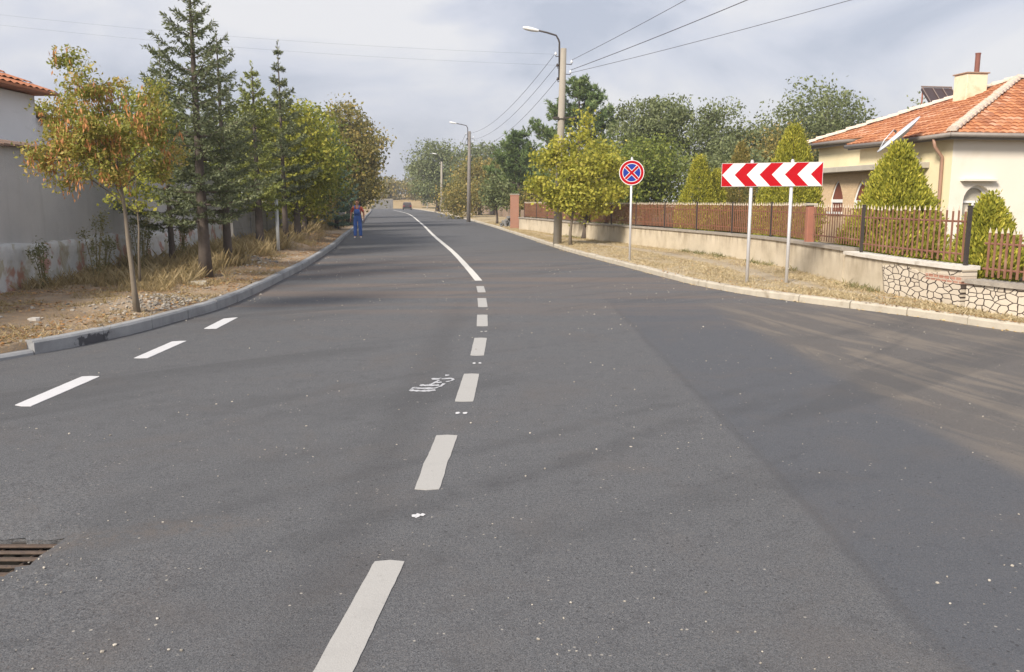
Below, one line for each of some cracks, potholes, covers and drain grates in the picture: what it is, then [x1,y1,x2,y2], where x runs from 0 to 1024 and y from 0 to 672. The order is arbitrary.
drain grate [0,540,57,577]
